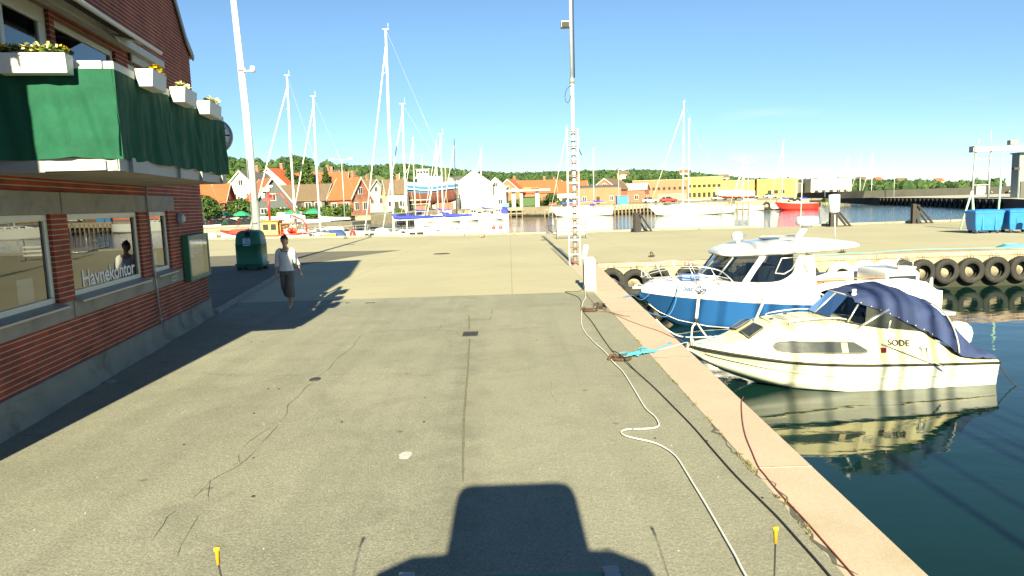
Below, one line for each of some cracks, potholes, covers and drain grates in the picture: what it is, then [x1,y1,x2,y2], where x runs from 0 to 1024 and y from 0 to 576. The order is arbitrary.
crack [153,335,443,556]
